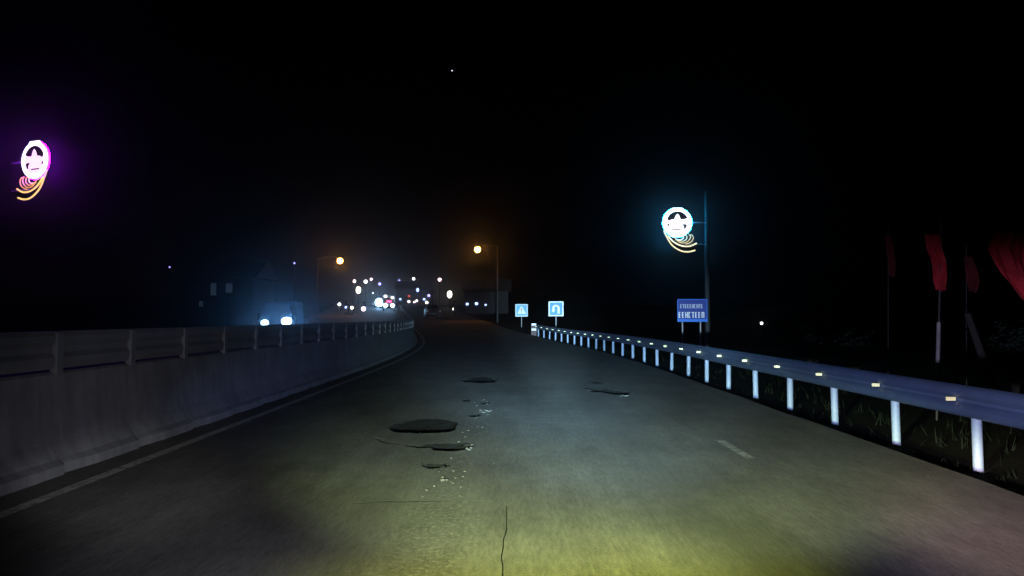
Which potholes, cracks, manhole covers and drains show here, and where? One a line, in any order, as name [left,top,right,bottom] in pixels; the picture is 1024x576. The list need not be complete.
pothole [403,442,474,452]
pothole [384,417,460,434]
